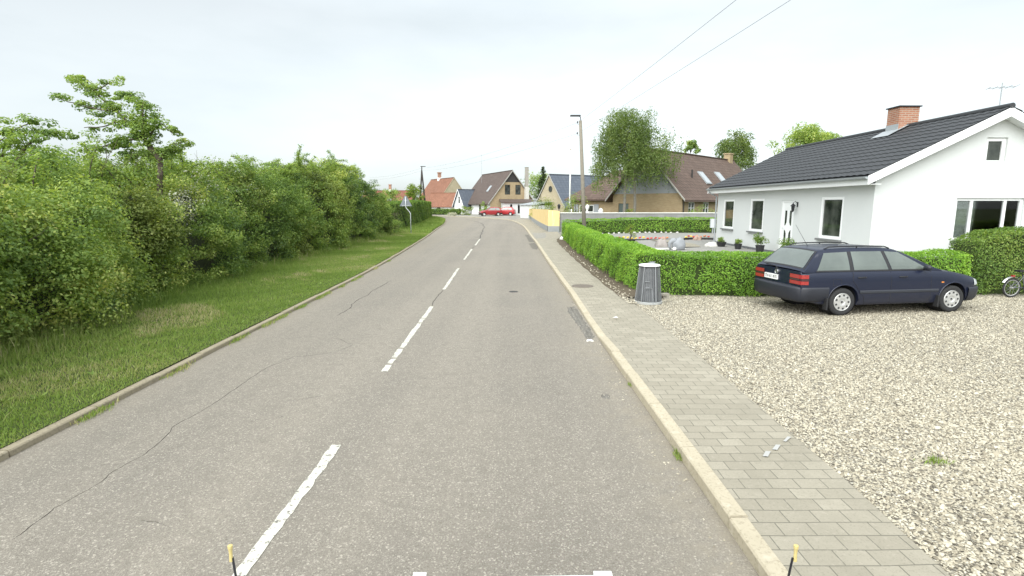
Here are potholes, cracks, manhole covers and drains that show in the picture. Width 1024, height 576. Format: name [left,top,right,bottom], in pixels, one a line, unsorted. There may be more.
crack [15,338,350,538]
